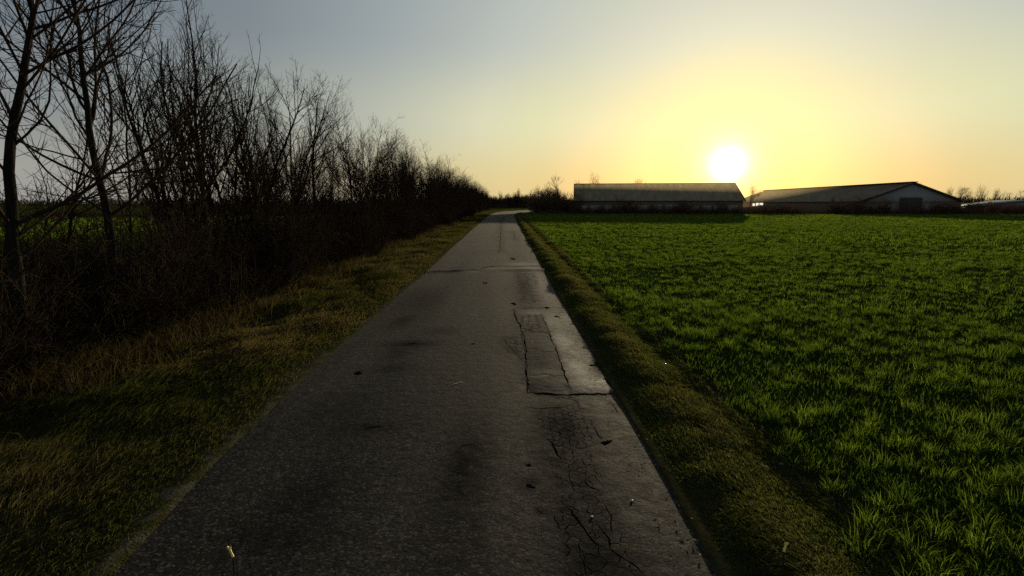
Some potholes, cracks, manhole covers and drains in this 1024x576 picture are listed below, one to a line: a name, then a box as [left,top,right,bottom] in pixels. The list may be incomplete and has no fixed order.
crack [480,266,642,576]
